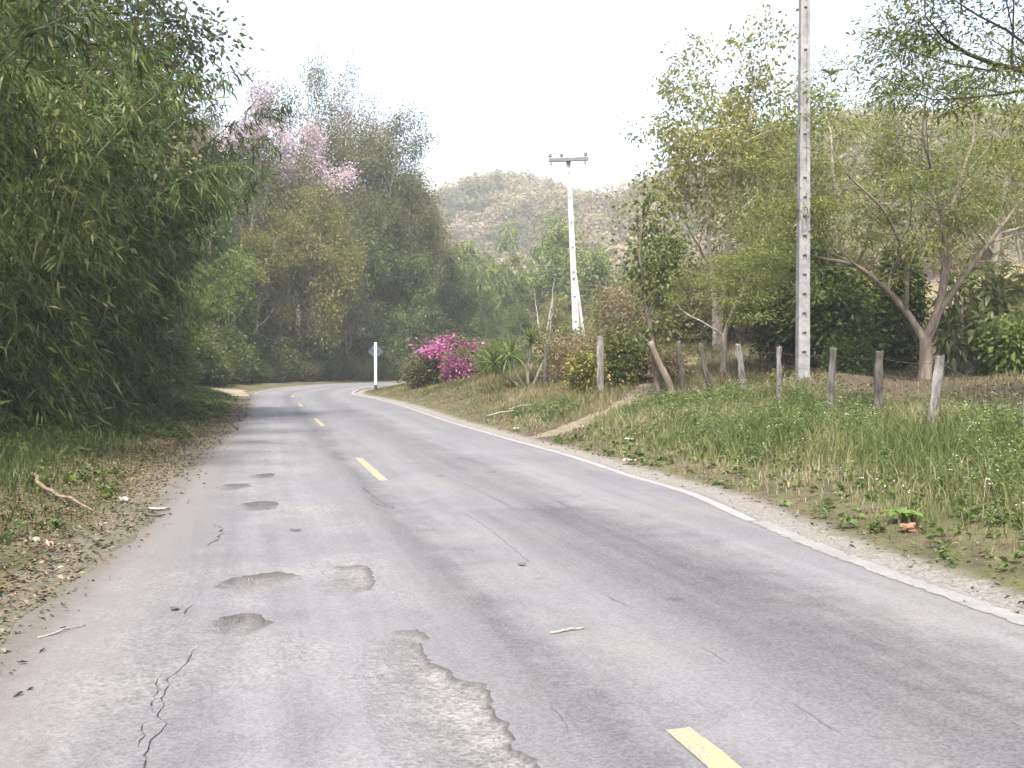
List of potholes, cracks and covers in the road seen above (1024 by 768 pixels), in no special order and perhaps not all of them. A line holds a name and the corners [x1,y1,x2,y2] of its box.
pothole [212,571,303,596]
pothole [311,565,376,596]
pothole [234,501,279,512]
pothole [211,484,255,492]
crack [138,647,199,768]
pothole [350,629,541,768]
crack [785,699,849,739]
crack [208,525,236,550]
pothole [198,613,273,638]
